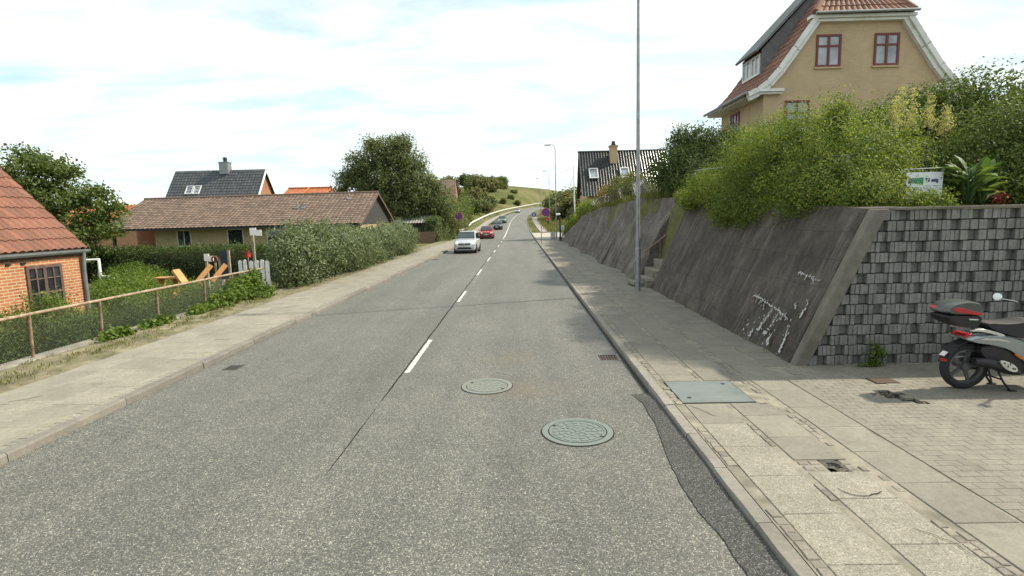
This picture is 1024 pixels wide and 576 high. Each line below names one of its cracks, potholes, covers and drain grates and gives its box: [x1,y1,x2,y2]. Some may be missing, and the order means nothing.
pothole [873,391,927,404]
utility cover [663,381,757,404]
pothole [818,460,848,472]
manhole cover [541,418,615,447]
manhole cover [461,378,513,395]
